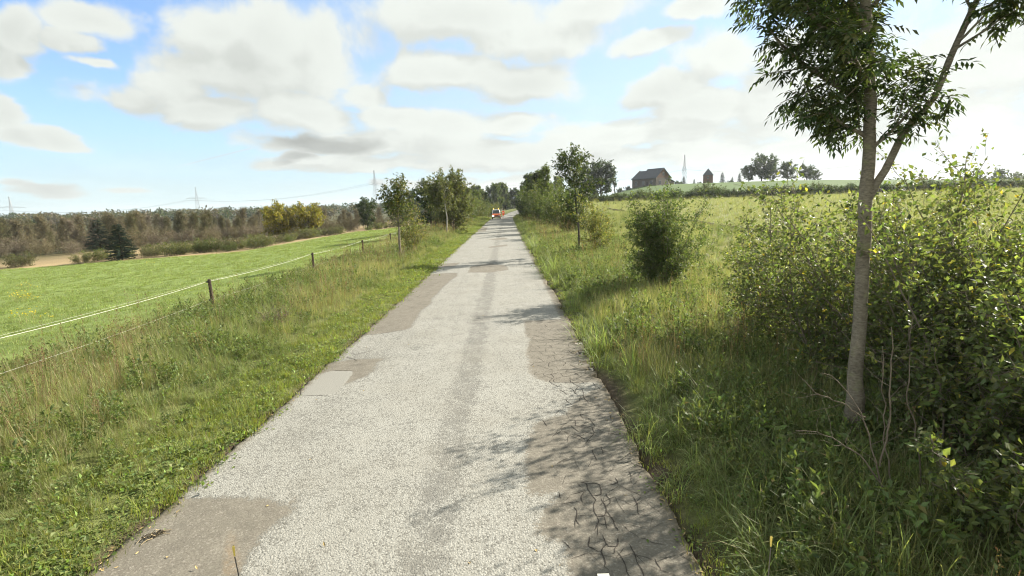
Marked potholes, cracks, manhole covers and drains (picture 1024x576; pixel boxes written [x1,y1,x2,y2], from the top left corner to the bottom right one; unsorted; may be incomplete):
crack [527,324,614,460]
crack [553,425,693,576]
